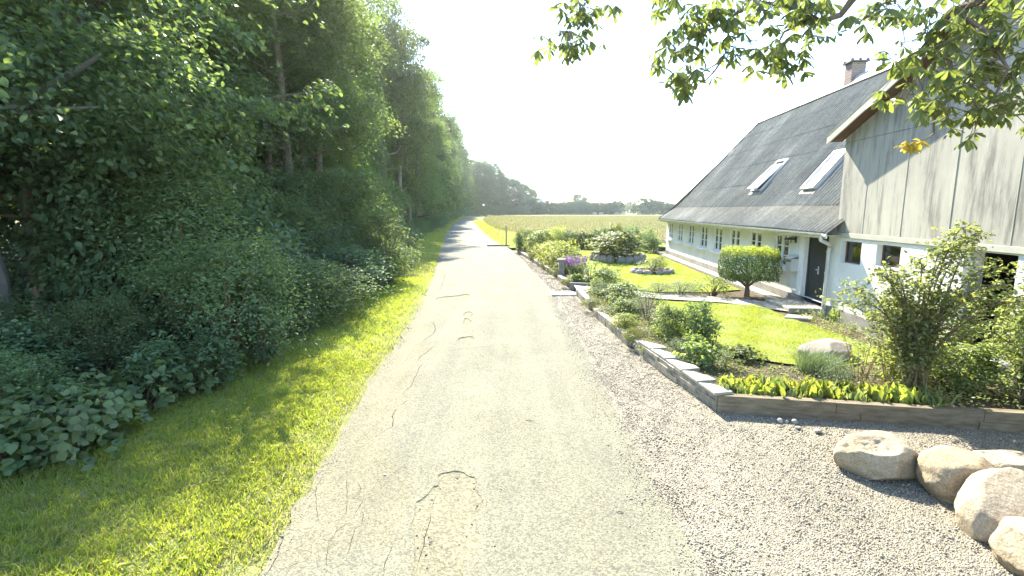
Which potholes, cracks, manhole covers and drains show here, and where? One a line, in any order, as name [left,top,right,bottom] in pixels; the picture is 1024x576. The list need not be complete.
crack [383,323,436,432]
crack [277,470,364,574]
